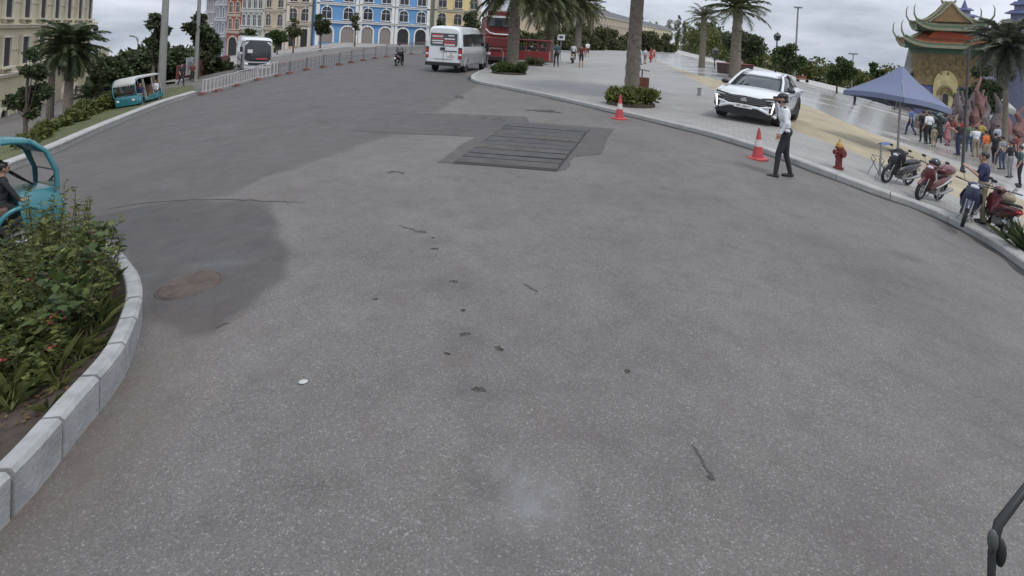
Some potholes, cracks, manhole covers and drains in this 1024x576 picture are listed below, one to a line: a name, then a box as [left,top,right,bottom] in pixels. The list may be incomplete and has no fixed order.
manhole cover [154,271,223,300]
crack [104,199,304,210]
crack [692,444,715,480]
